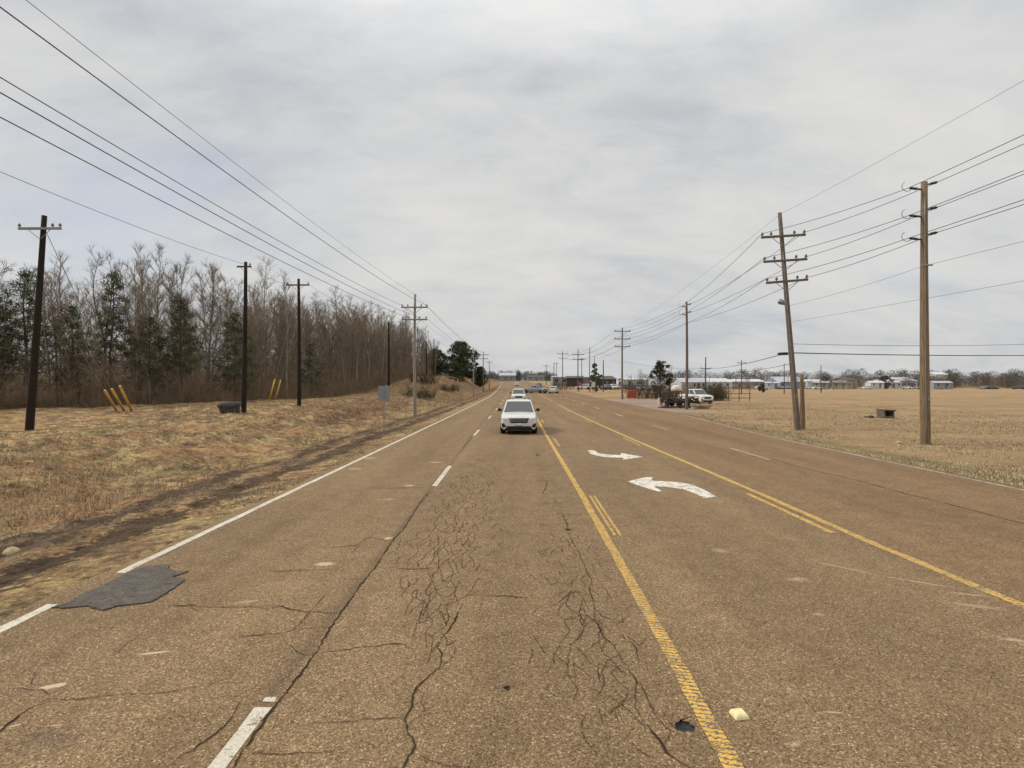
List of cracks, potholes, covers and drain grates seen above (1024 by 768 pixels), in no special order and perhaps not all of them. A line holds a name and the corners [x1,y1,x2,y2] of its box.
crack [0,671,202,731]
crack [177,450,536,768]
pothole [675,720,695,732]
crack [529,484,691,768]
